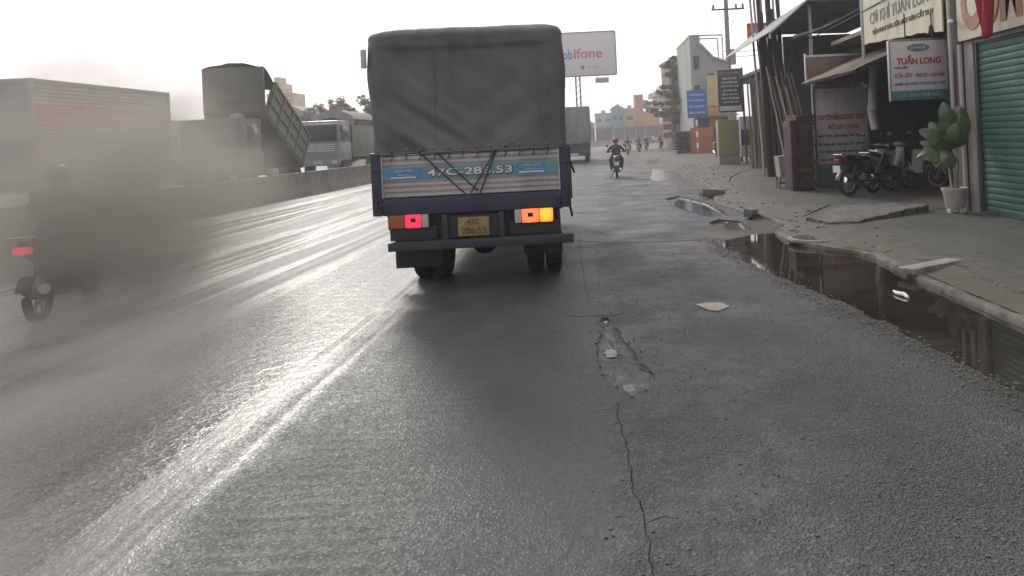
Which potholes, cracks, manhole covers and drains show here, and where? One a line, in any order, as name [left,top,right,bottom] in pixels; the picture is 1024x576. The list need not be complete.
crack [616,405,680,576]
pothole [704,218,752,230]
pothole [594,325,656,398]
pothole [664,195,728,217]
